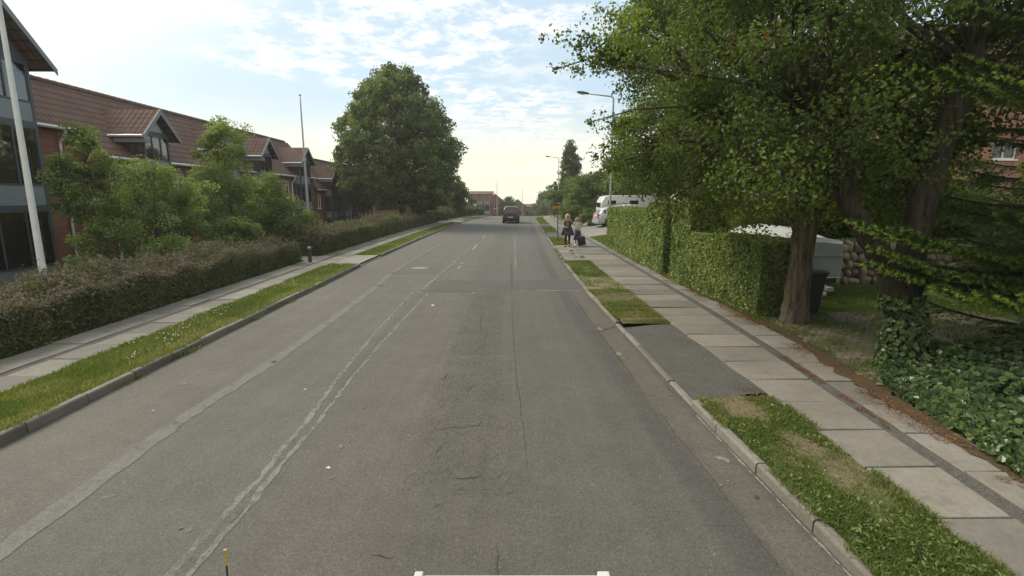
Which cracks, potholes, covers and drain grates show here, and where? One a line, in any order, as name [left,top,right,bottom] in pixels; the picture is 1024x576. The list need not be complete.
crack [430,293,513,409]
crack [402,410,513,495]
